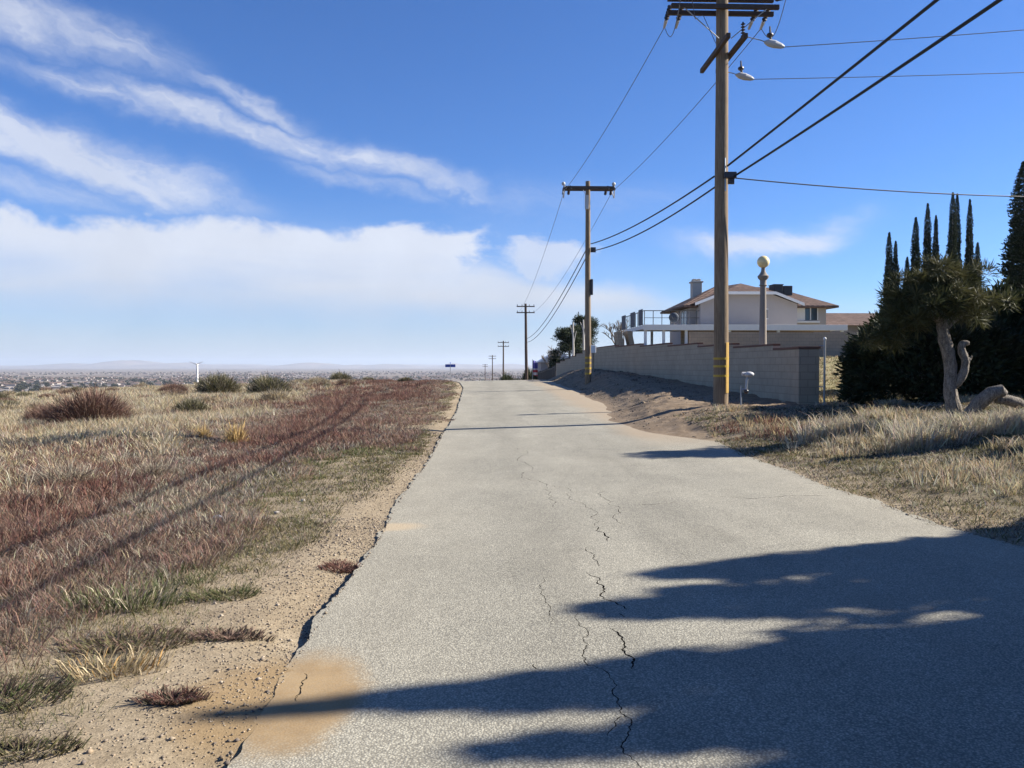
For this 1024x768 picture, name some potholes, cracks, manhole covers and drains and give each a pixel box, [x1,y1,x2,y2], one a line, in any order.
crack [517,448,642,768]
